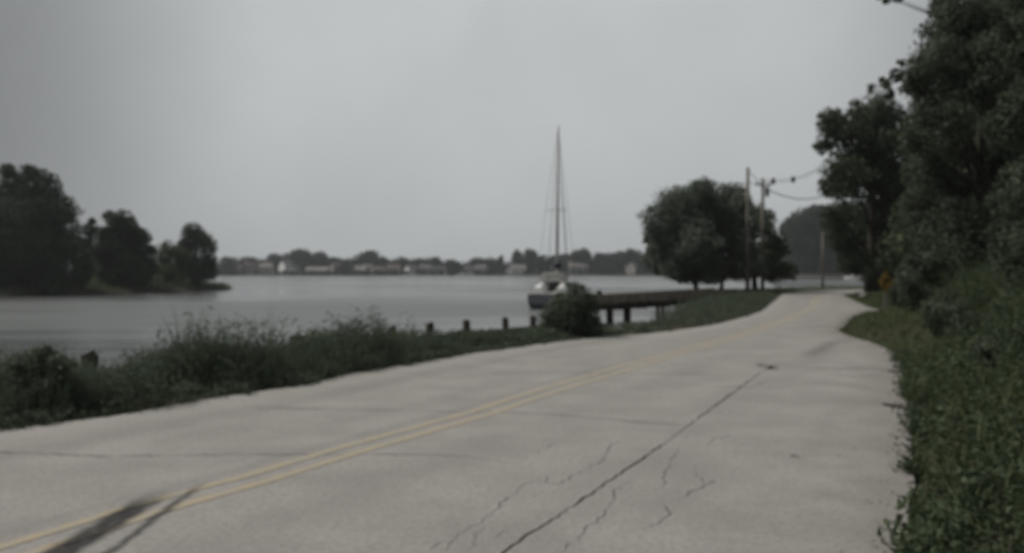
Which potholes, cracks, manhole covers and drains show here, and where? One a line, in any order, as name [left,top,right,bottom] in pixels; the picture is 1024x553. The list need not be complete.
crack [259,364,899,553]
